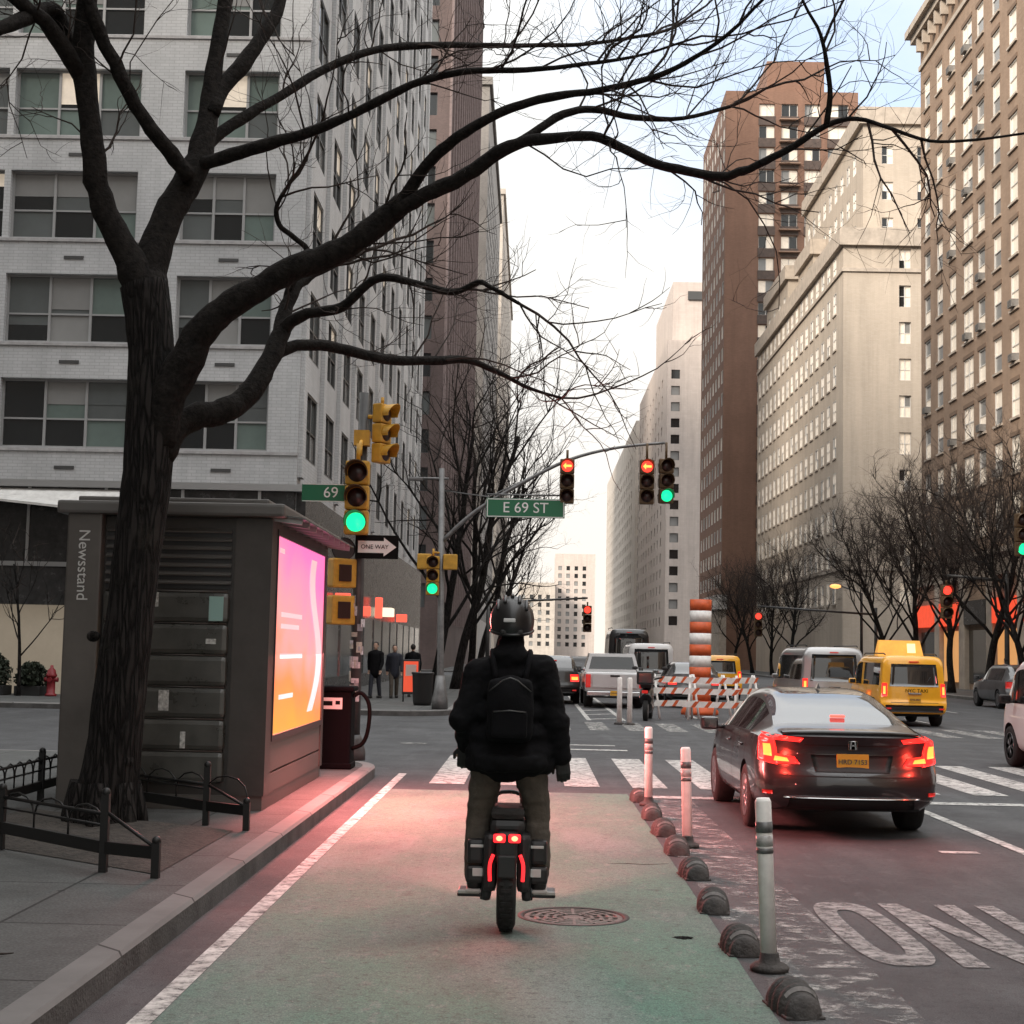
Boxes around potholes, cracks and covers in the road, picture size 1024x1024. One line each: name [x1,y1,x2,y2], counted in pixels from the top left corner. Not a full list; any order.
manhole cover [517,907,630,926]
